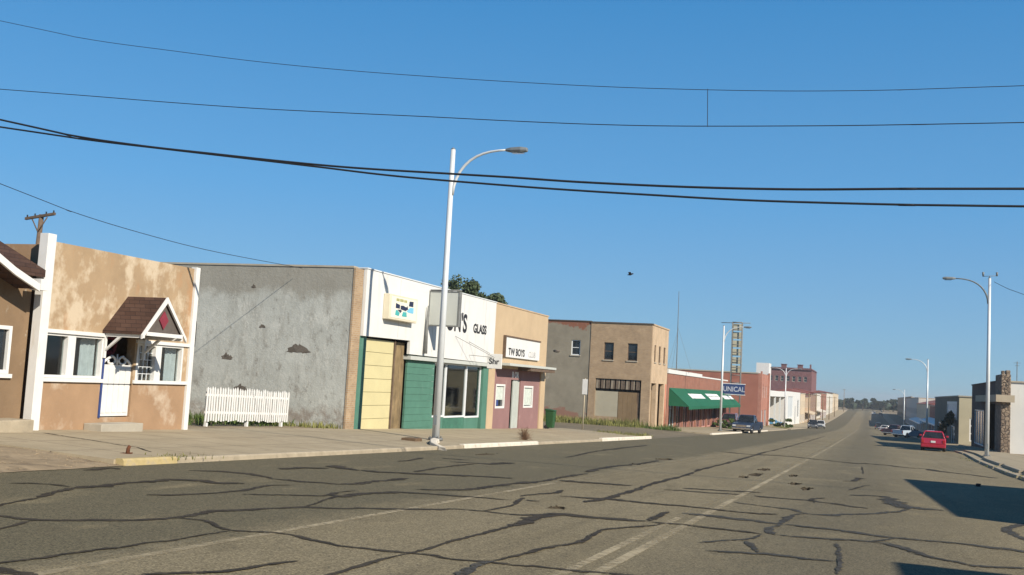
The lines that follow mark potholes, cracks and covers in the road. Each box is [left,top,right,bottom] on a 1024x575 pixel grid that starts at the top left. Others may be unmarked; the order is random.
crack [0,436,994,514]
crack [143,560,298,574]
